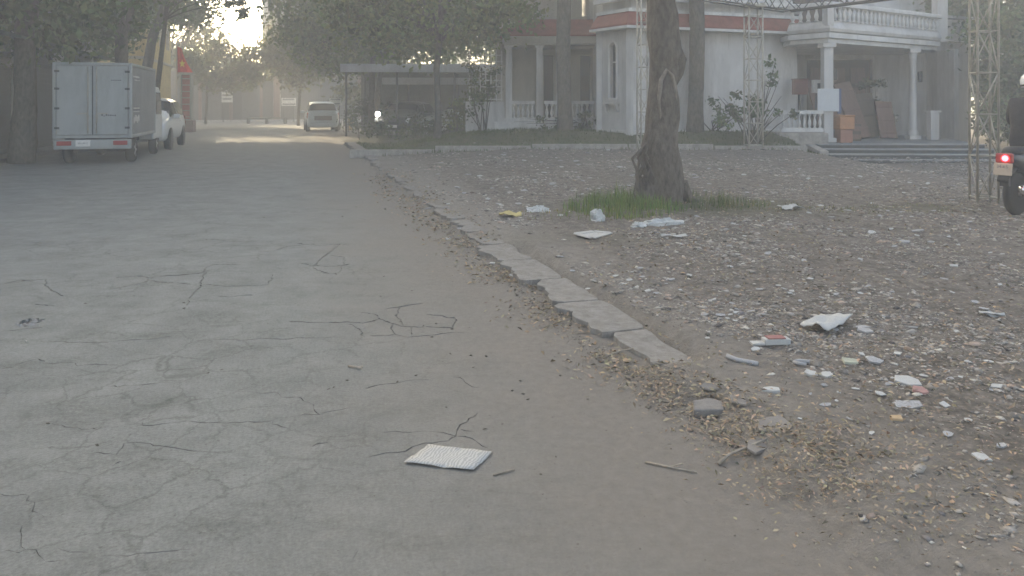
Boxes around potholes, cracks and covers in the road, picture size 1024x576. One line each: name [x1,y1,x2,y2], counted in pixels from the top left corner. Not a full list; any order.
crack [90,392,346,464]
crack [4,279,63,306]
crack [369,415,487,457]
crack [1,327,163,369]
crack [109,239,349,306]
crack [1,494,81,562]
crack [219,303,463,340]
